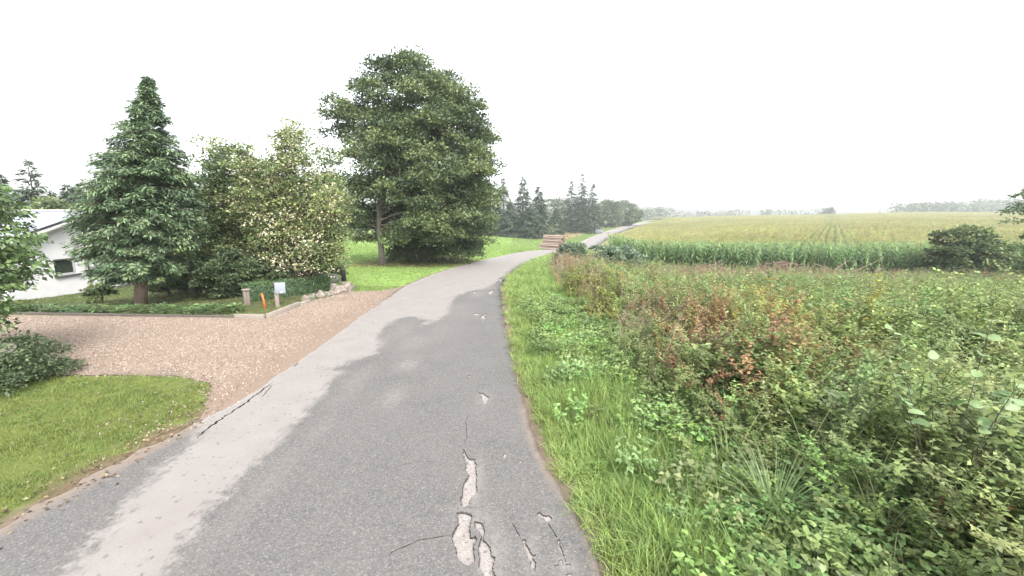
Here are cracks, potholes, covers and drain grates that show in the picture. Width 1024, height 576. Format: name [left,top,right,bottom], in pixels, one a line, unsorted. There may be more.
crack [193,382,273,441]
pothole [460,449,478,507]
pothole [474,521,496,576]
pothole [451,511,477,565]
crack [385,535,451,558]
